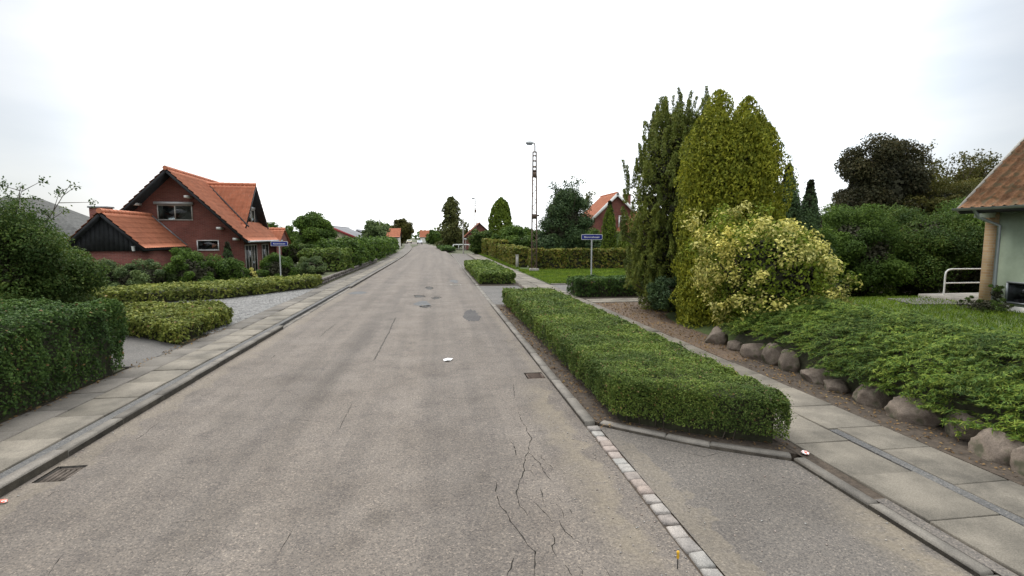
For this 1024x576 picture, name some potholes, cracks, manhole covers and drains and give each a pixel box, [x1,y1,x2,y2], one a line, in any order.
crack [495,412,610,576]
drain grate [32,465,88,483]
